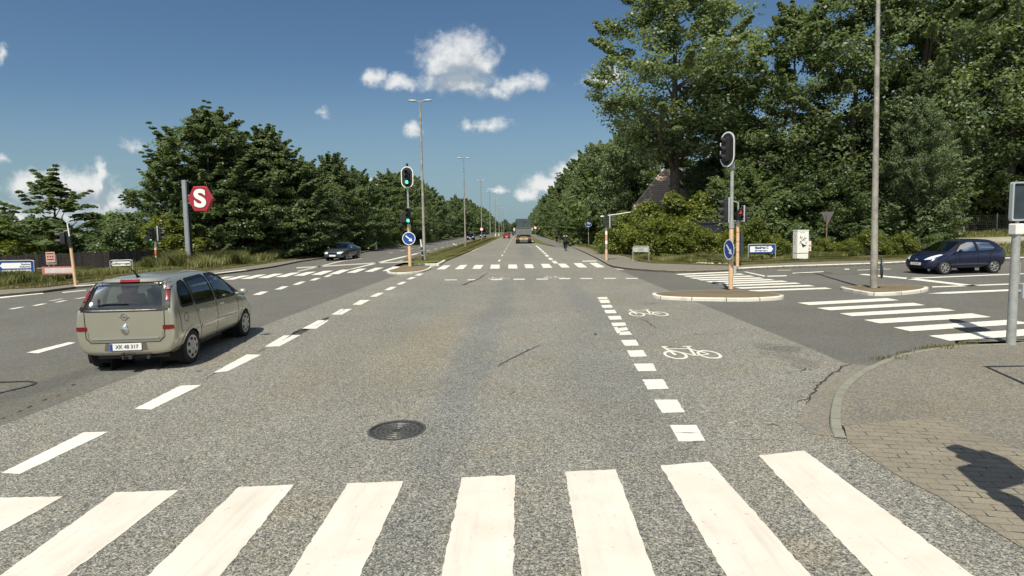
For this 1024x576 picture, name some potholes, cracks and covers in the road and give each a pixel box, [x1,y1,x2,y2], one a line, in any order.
manhole cover [367,420,426,441]
crack [783,364,851,404]
